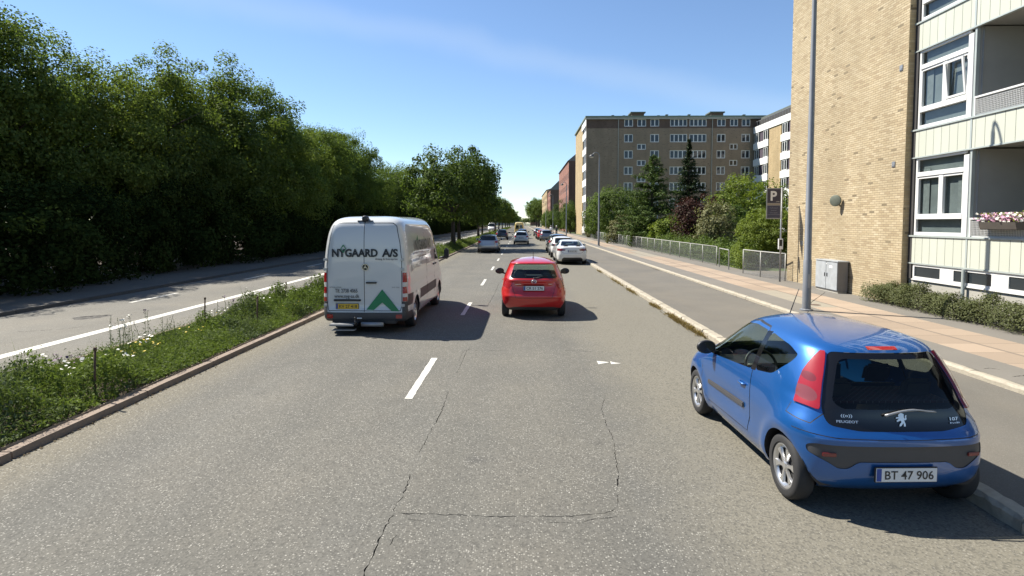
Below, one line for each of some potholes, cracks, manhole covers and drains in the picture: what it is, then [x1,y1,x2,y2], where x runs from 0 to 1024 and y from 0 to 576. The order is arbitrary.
crack [363,348,619,576]
